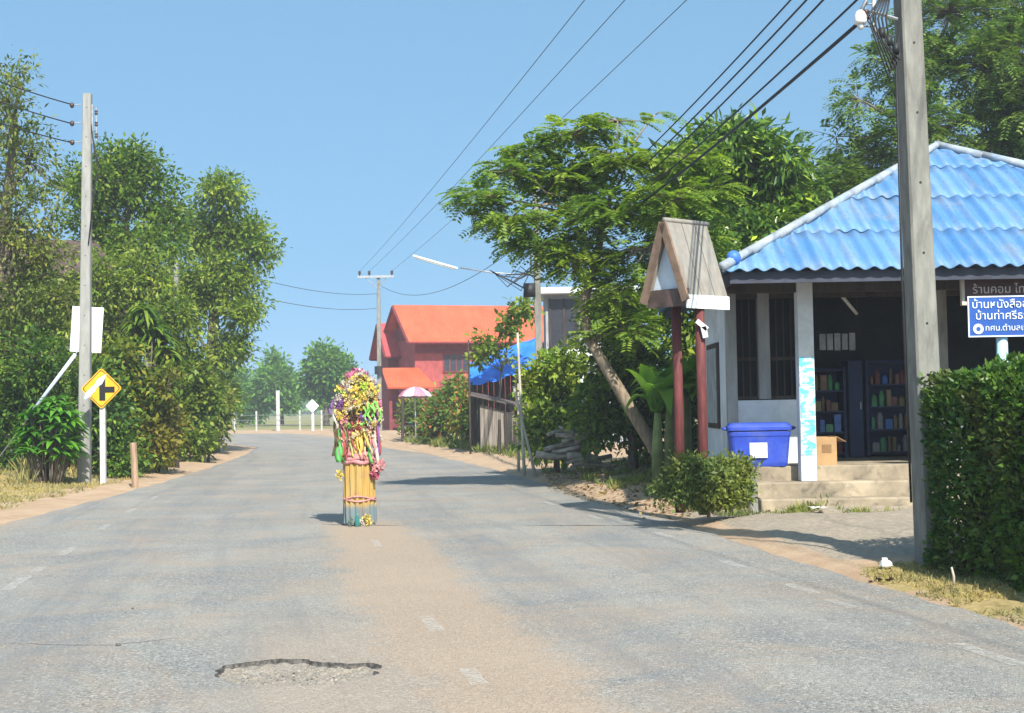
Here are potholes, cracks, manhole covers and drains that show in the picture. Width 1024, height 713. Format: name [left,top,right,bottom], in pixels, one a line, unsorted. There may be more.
pothole [215,659,382,686]
